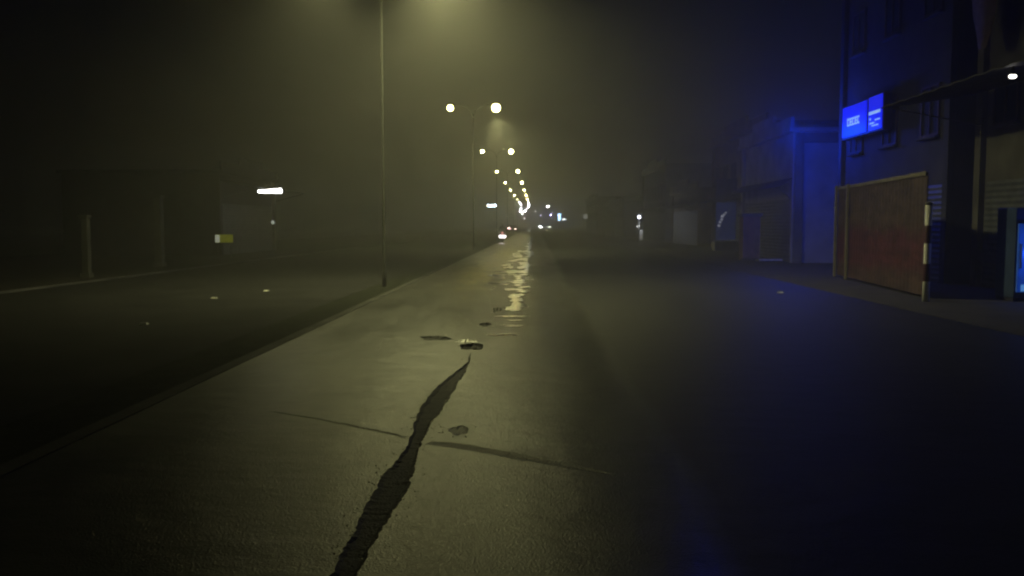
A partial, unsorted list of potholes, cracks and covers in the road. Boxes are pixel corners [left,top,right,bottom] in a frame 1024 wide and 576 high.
pothole [456,339,485,350]
crack [269,353,614,576]
